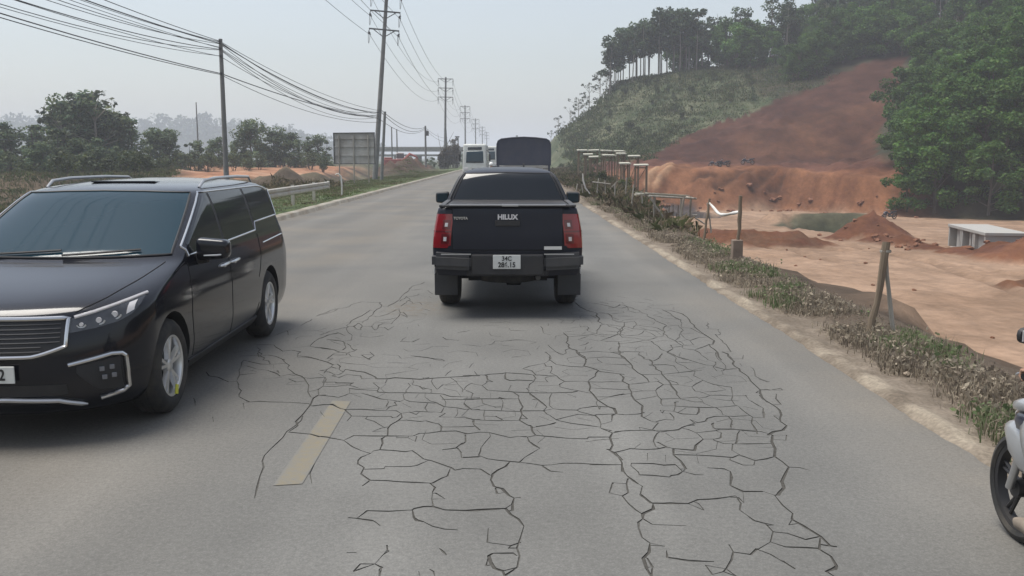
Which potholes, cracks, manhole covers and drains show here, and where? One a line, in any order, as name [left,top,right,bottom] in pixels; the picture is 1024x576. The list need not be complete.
crack [189,284,838,576]
